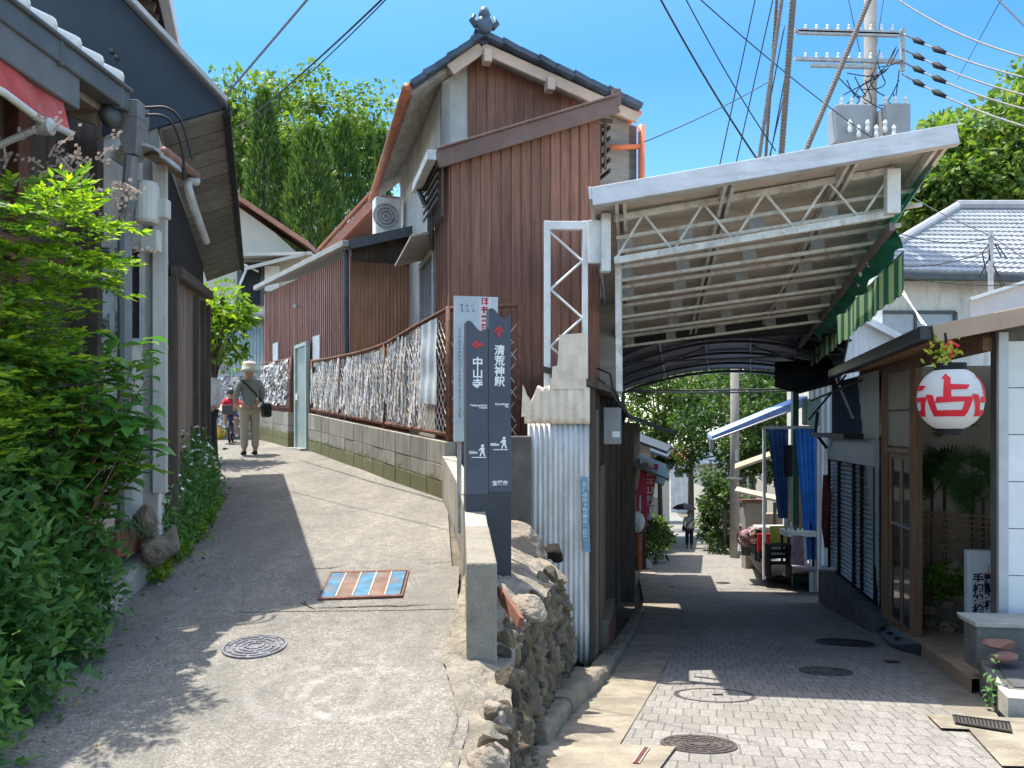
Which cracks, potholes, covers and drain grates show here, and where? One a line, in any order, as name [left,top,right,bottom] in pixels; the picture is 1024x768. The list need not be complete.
drain grate [952,714,1012,732]
manhole cover [799,666,853,676]
manhole cover [673,688,756,702]
manhole cover [221,634,287,659]
manhole cover [813,637,878,648]
manhole cover [661,734,738,754]
